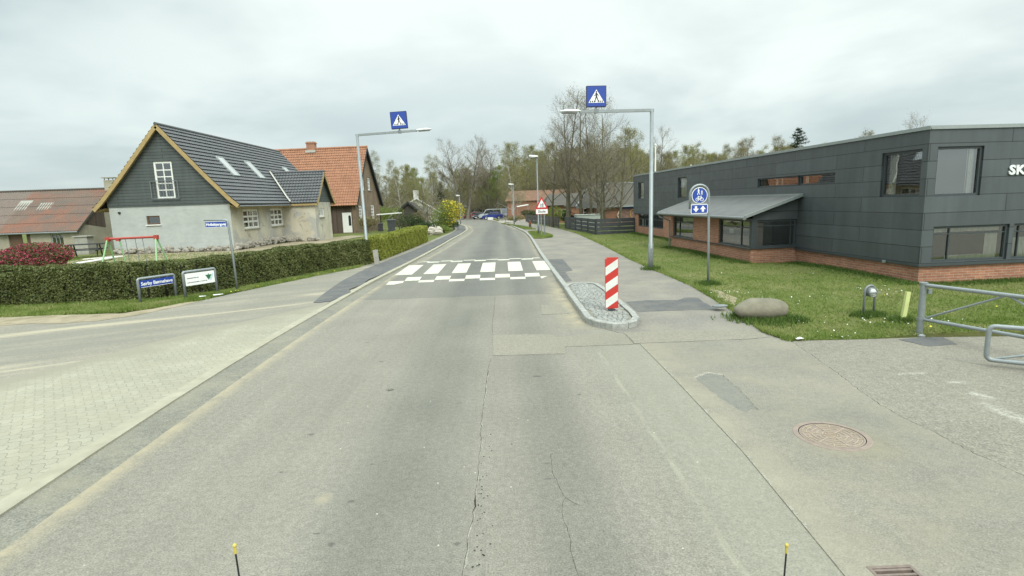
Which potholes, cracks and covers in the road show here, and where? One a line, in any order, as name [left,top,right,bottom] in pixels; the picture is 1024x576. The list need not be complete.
crack [551,460,578,574]
manhole cover [792,421,873,451]
crack [462,358,492,576]
drain grate [866,564,923,576]
